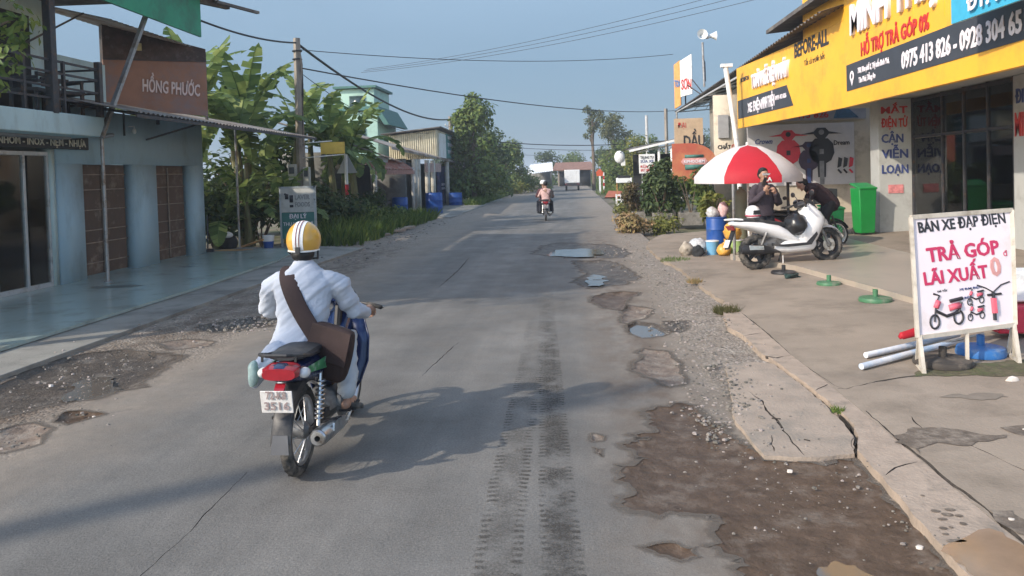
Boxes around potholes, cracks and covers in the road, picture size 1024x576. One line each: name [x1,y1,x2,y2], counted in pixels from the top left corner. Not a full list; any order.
pothole [0,349,187,419]
pothole [52,410,108,425]
crack [750,392,804,455]
pothole [531,242,631,259]
pothole [614,402,958,576]
pothole [588,291,641,311]
pothole [623,321,673,338]
pothole [568,260,642,289]
pothole [589,433,606,442]
